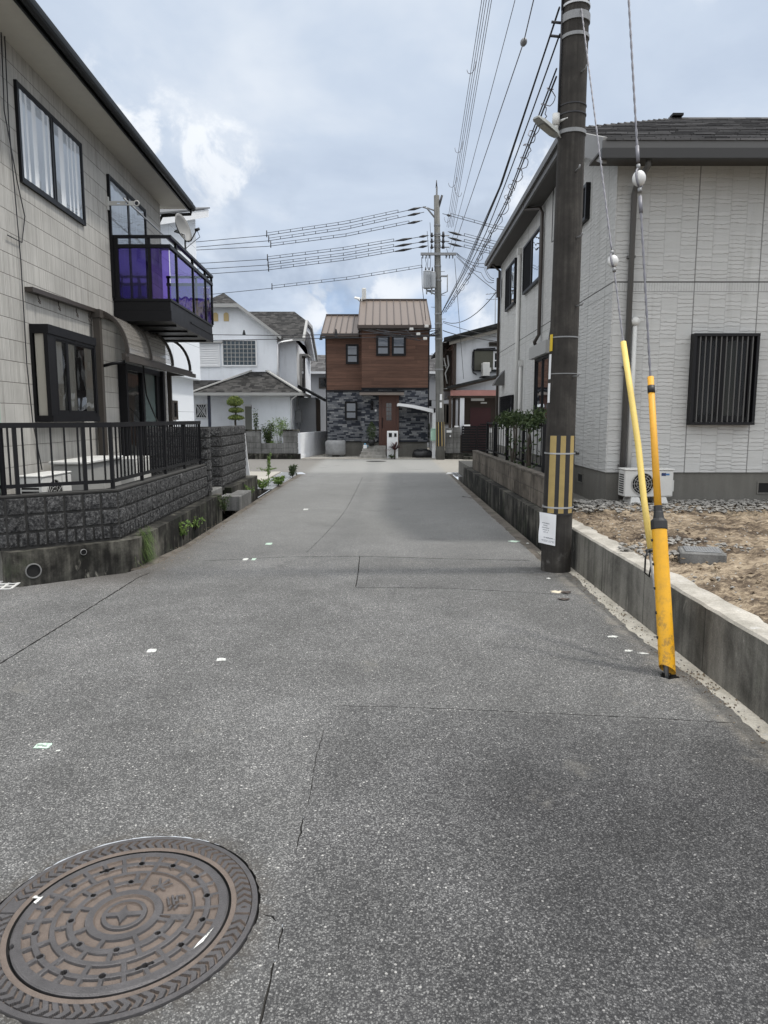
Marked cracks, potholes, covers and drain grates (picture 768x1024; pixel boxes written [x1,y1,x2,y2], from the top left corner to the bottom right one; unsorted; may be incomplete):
manhole cover [0,837,261,1024]
